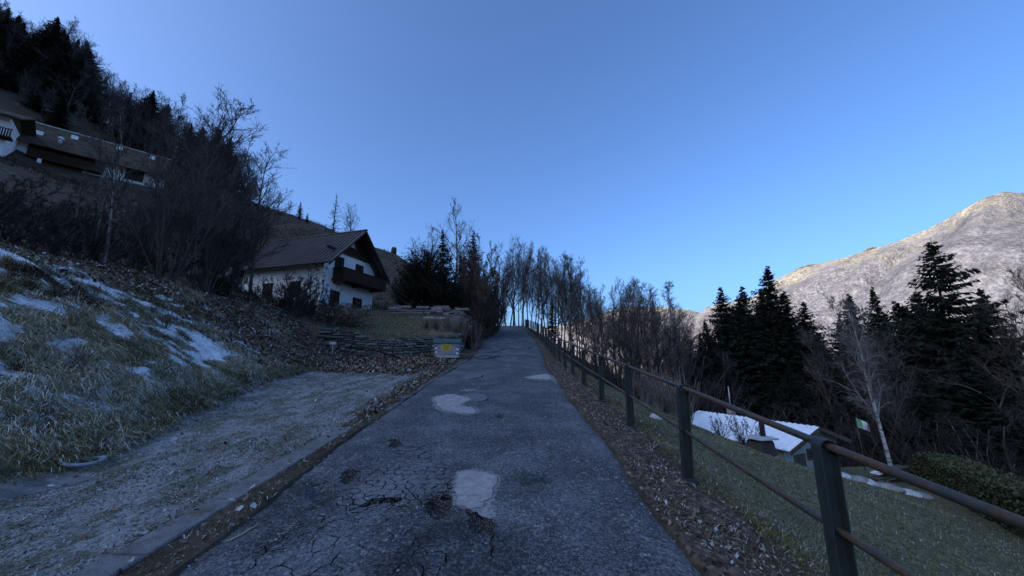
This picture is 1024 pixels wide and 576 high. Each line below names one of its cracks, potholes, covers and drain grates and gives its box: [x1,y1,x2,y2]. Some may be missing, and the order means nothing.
crack [238,441,495,576]
pothole [424,493,453,520]
pothole [465,510,497,535]
pothole [338,469,361,484]
crack [463,337,532,380]
